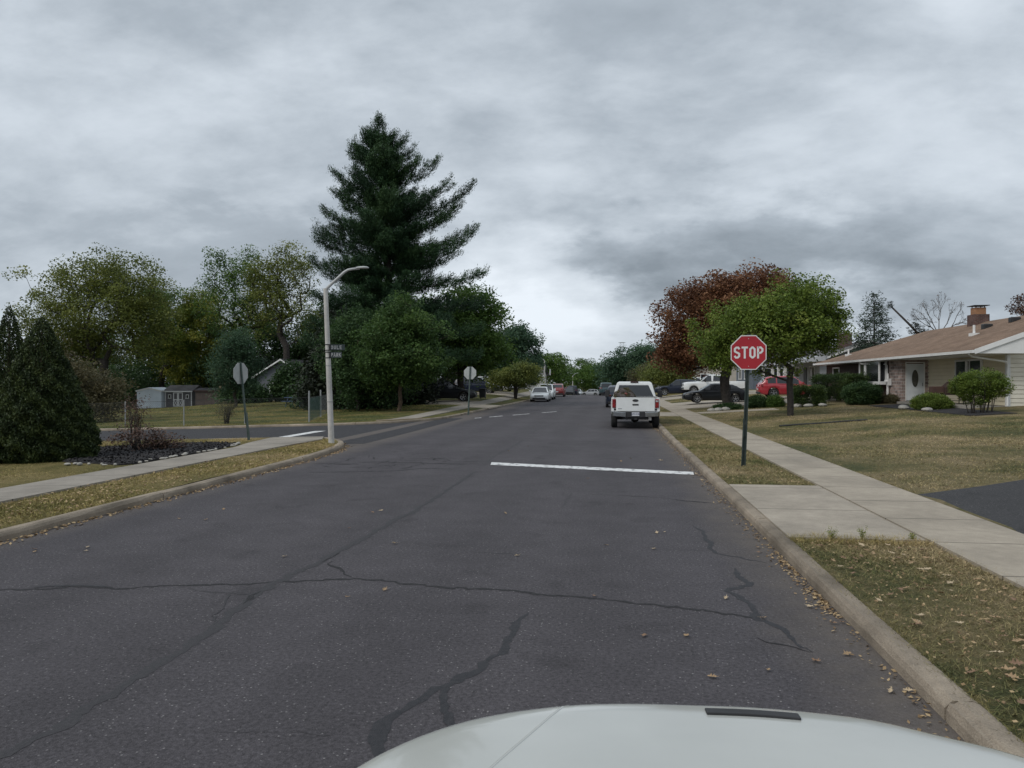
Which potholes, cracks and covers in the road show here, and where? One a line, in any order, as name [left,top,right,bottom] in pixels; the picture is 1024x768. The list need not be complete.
crack [2,561,752,624]
